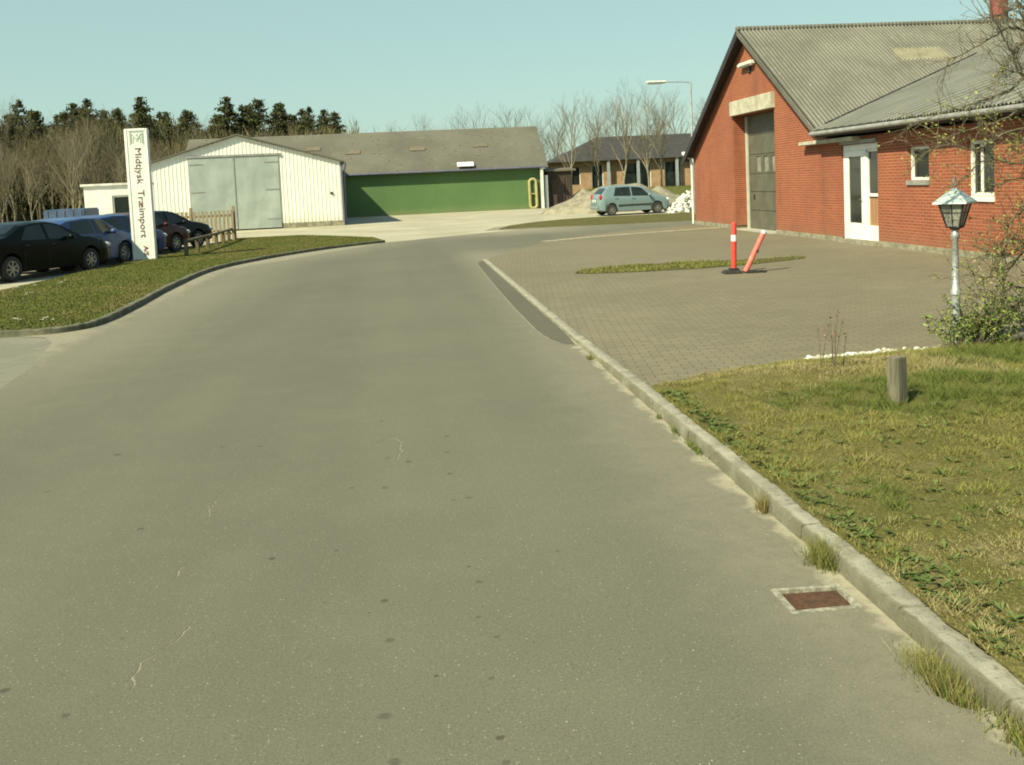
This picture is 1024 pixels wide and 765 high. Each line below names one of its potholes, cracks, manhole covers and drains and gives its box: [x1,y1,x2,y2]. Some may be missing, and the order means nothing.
manhole cover [770,584,862,614]
crack [130,620,194,692]
